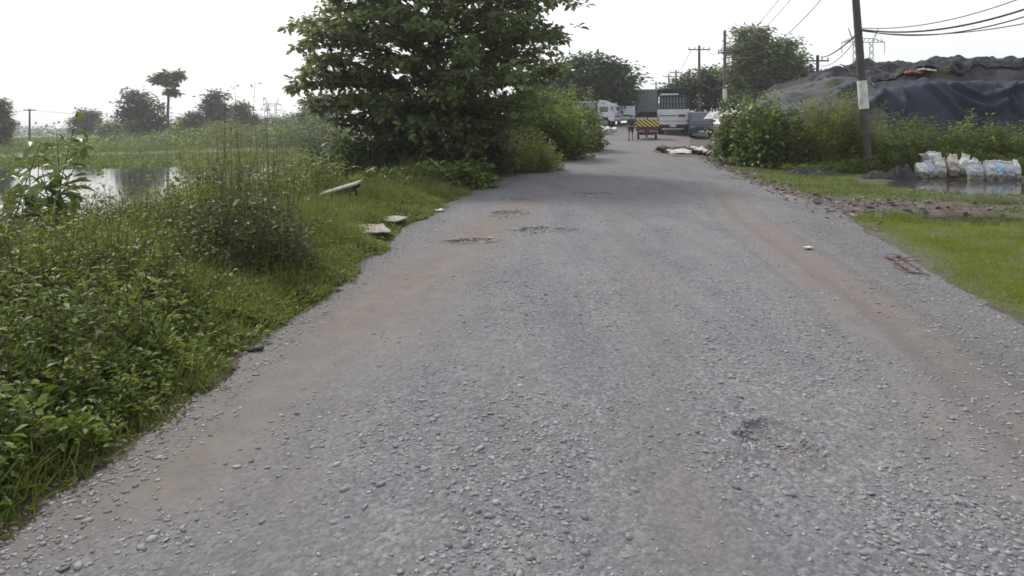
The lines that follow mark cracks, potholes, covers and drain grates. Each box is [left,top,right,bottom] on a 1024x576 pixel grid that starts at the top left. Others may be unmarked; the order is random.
pothole [429,237,507,245]
pothole [711,411,846,471]
pothole [482,209,534,221]
pothole [488,196,545,204]
pothole [498,225,597,235]
